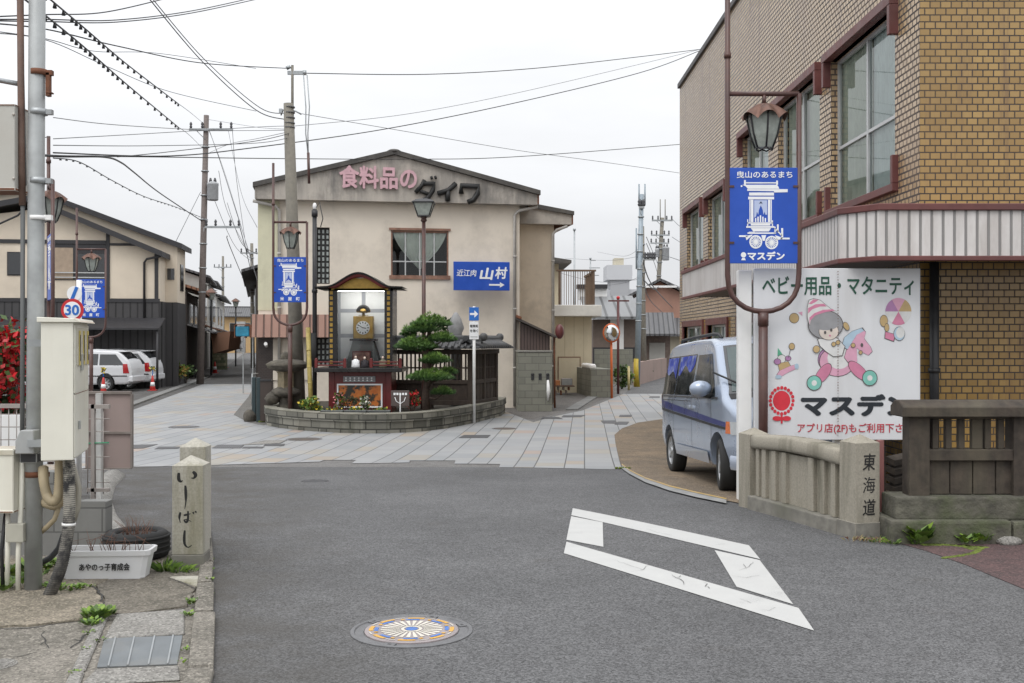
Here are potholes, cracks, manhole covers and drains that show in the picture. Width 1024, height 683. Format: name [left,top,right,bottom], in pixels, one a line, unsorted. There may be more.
crack [14,579,105,657]
manhole cover [350,614,473,649]
